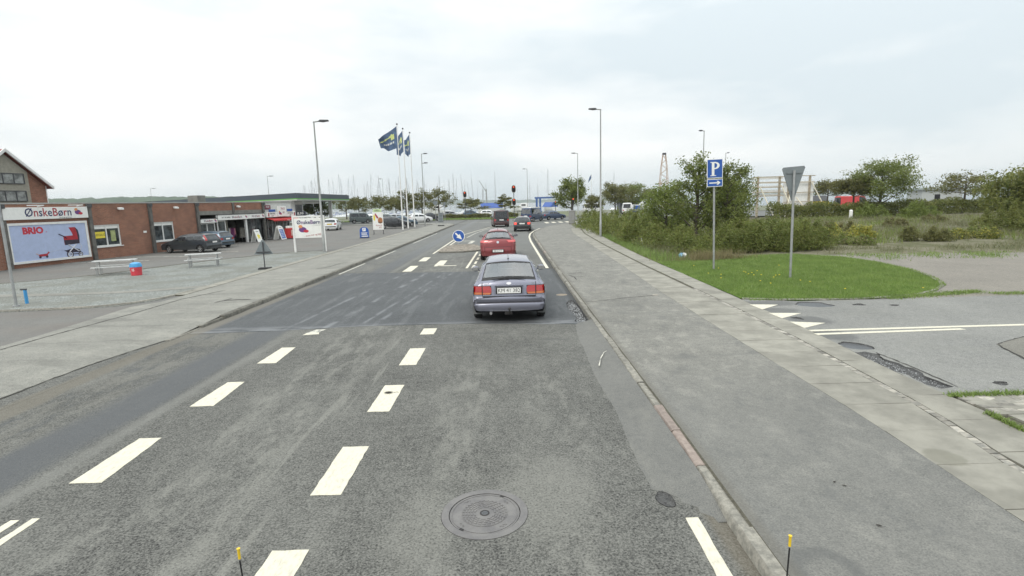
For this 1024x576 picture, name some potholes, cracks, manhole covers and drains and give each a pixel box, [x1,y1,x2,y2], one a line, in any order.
pothole [855,352,953,389]
manhole cover [441,490,528,540]
pothole [566,300,588,322]
pothole [838,341,875,350]
pothole [655,491,676,507]
